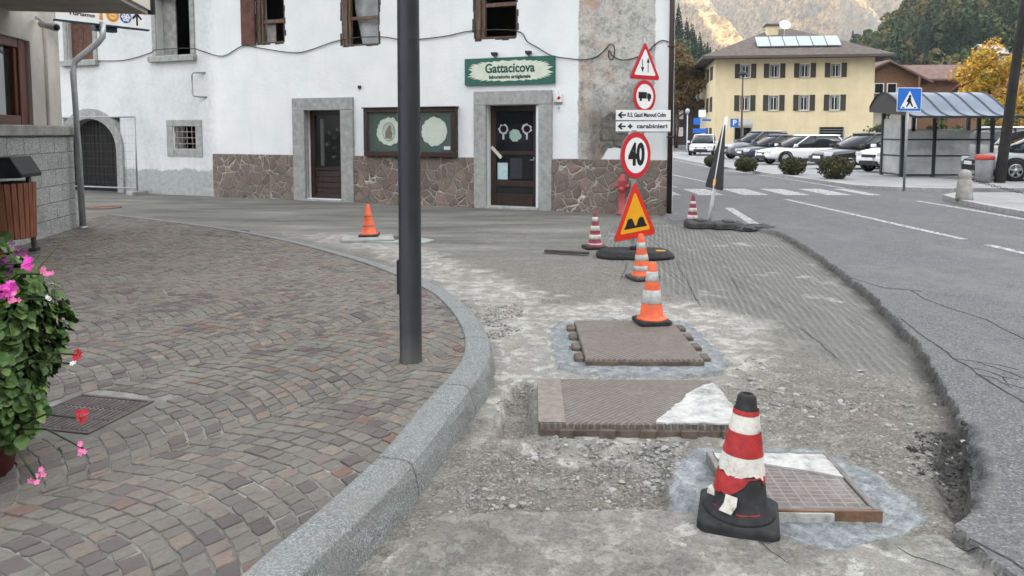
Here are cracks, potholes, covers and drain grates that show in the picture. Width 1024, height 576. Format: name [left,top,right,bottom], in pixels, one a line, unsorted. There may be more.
pothole [921,423,1005,531]
manhole cover [706,451,883,523]
crack [843,277,1024,403]
pothole [490,379,538,441]
manhole cover [566,320,711,366]
